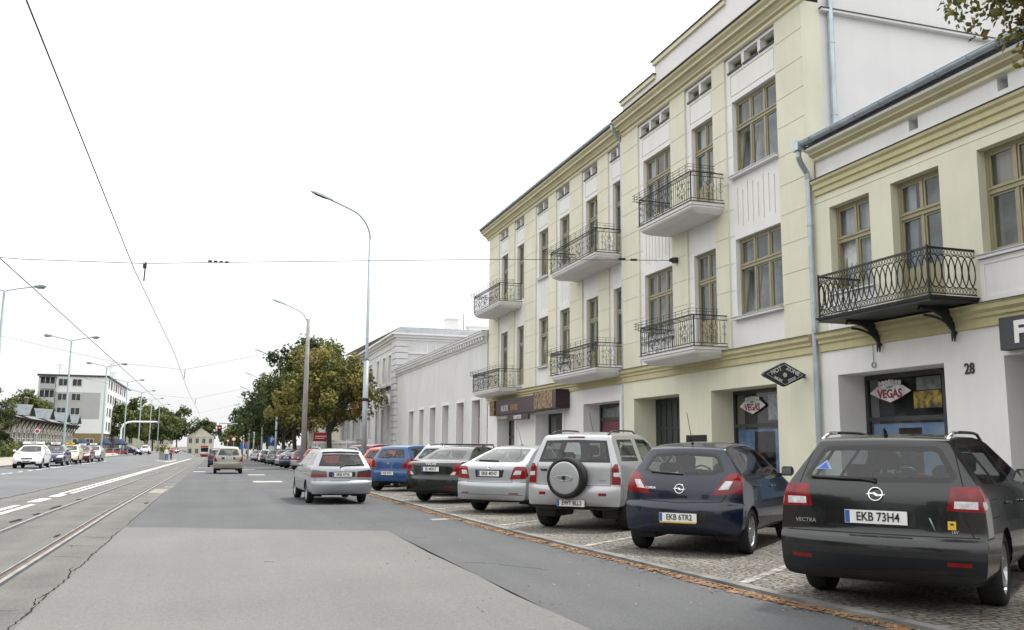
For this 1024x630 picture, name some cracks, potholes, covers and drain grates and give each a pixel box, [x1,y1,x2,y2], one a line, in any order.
crack [7,492,165,630]
